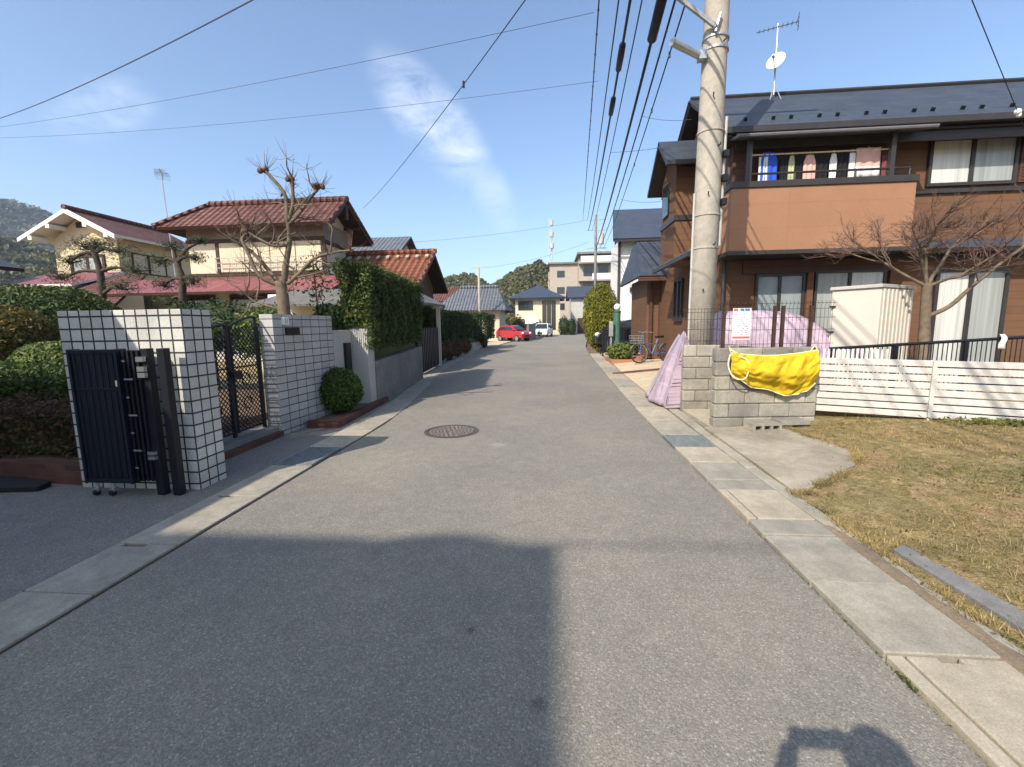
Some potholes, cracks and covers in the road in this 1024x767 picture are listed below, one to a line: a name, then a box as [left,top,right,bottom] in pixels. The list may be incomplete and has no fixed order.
drain grate [275,447,341,467]
manhole cover [424,425,479,438]
drain grate [662,435,716,450]
